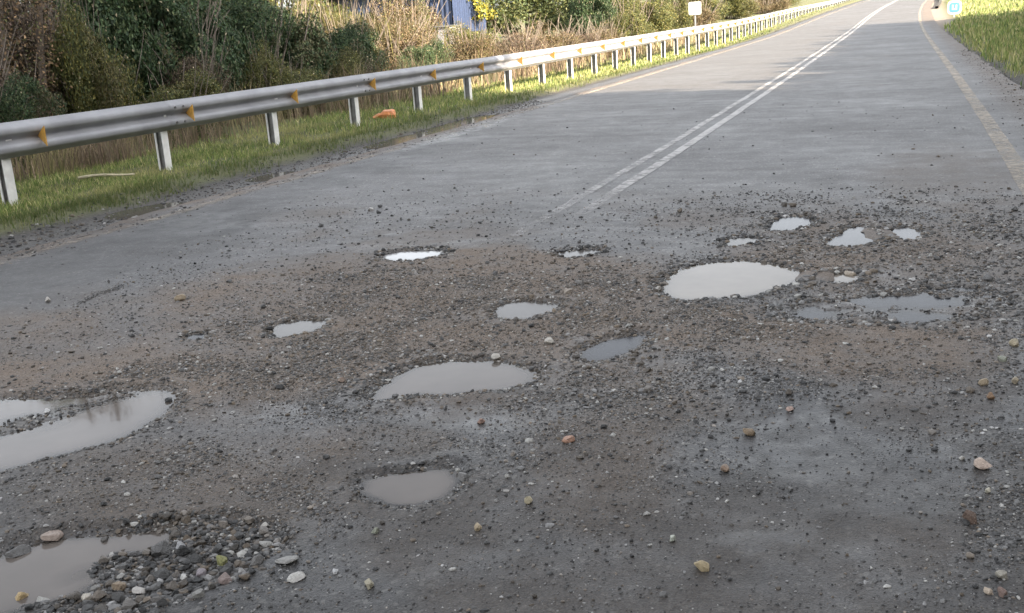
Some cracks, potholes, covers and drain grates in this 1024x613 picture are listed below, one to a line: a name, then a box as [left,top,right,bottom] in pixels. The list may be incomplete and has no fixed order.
pothole [363,245,463,265]
pothole [809,222,900,250]
pothole [537,244,616,260]
pothole [248,312,350,343]
pothole [741,280,1024,330]
pothole [335,349,568,410]
pothole [753,212,830,233]
pothole [324,449,495,521]
pothole [474,293,581,325]
pothole [0,375,213,483]
pothole [861,223,943,242]
